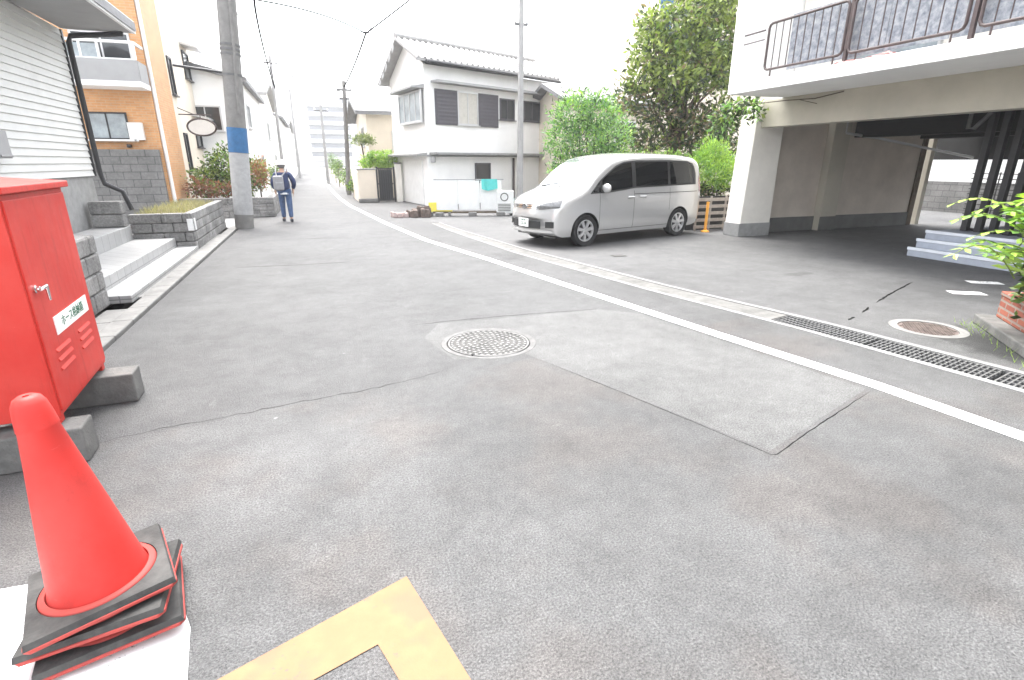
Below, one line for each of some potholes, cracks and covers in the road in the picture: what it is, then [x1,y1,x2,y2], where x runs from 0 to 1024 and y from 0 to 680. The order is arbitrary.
manhole cover [888,319,970,339]
drain grate [773,316,880,345]
crack [848,282,912,320]
drain grate [994,372,1024,389]
drain grate [867,339,1005,380]
manhole cover [441,328,536,359]
